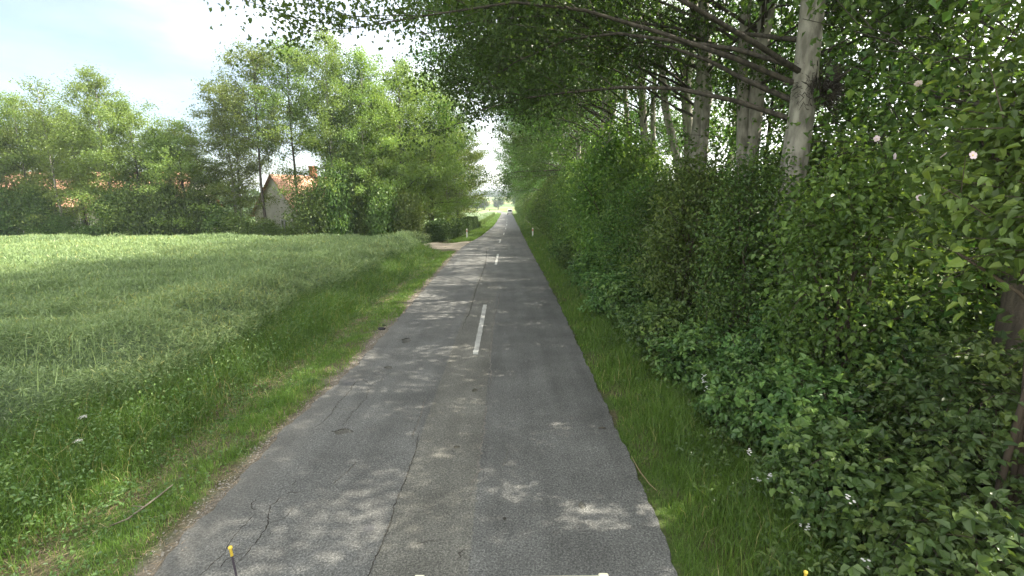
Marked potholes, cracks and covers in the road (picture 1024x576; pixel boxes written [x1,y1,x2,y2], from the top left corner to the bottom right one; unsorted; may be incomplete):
crack [311,377,384,429]
crack [201,480,303,574]
